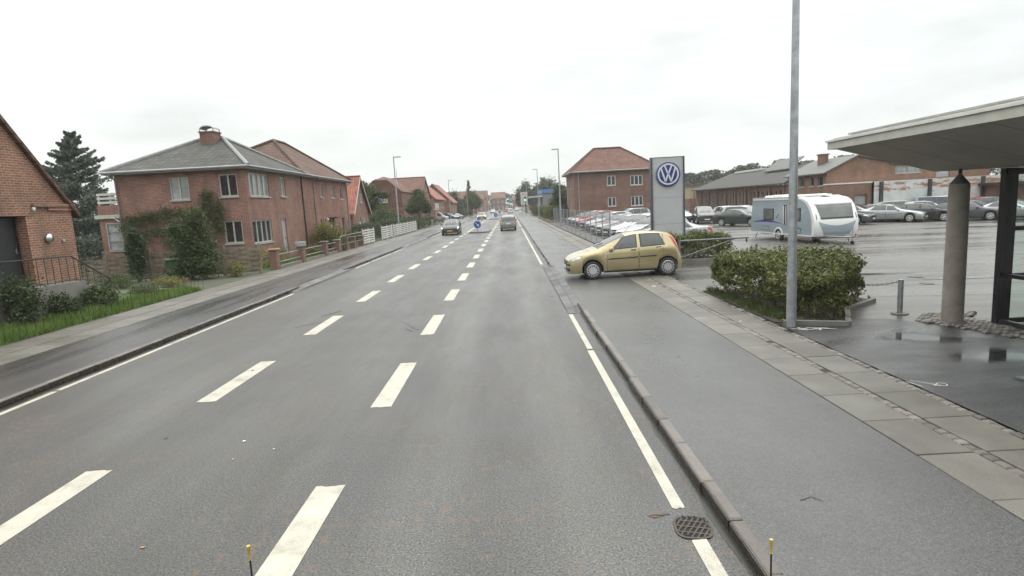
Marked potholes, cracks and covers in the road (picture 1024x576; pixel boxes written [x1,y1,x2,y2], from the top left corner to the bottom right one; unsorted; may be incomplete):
crack [295,309,426,332]
drain grate [673,515,713,539]
